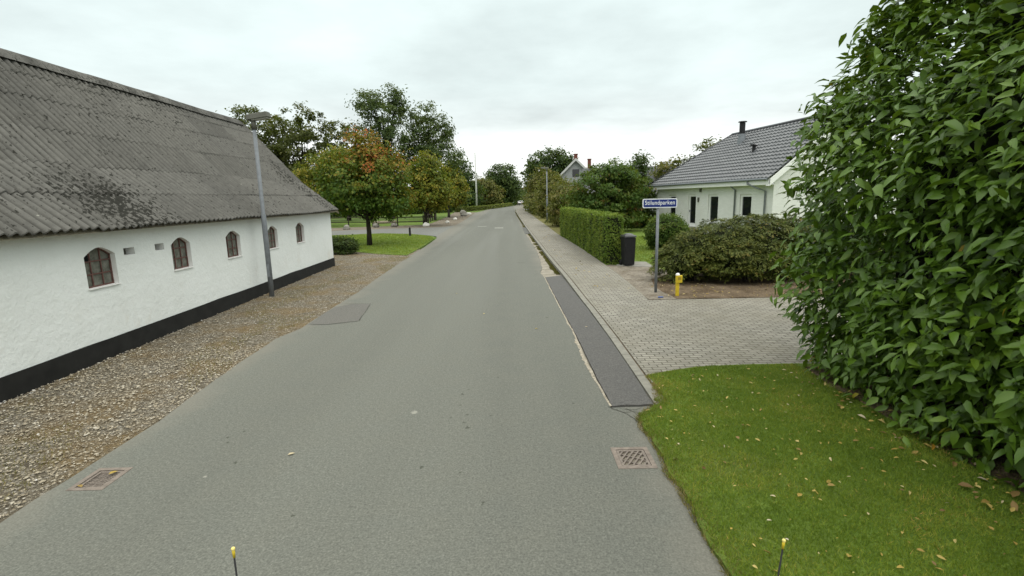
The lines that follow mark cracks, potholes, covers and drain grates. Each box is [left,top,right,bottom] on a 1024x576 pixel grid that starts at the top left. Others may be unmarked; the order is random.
drain grate [65,467,133,491]
drain grate [610,447,658,469]
